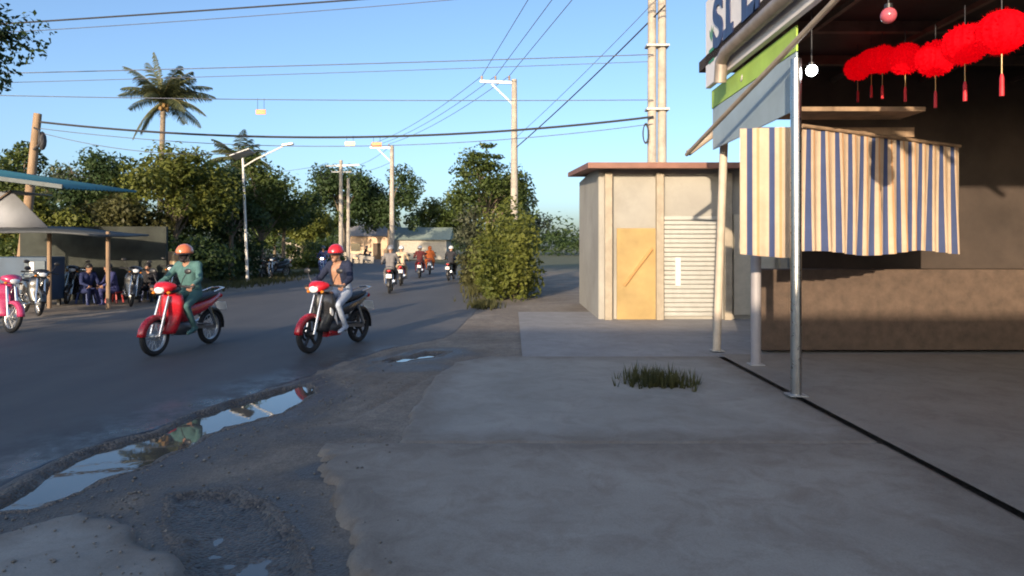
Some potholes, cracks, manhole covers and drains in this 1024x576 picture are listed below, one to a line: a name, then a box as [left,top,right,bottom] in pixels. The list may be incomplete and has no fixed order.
pothole [159,484,317,576]
pothole [0,382,321,514]
pothole [371,350,453,363]
